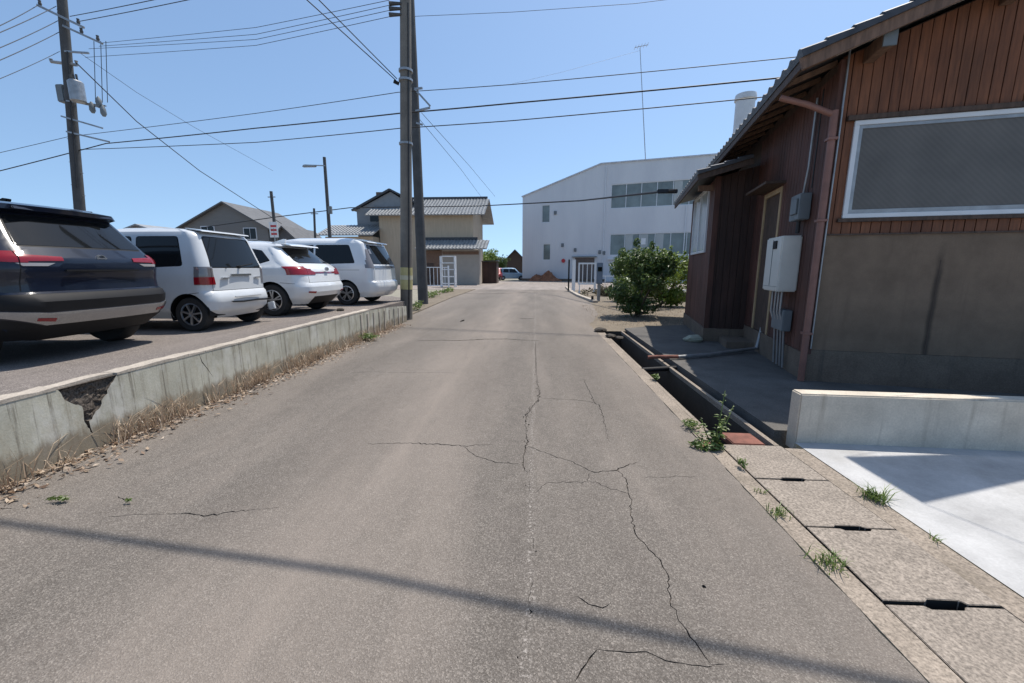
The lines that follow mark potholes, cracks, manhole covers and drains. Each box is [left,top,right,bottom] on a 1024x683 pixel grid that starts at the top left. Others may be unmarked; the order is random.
crack [109,497,278,517]
crack [369,344,725,681]
